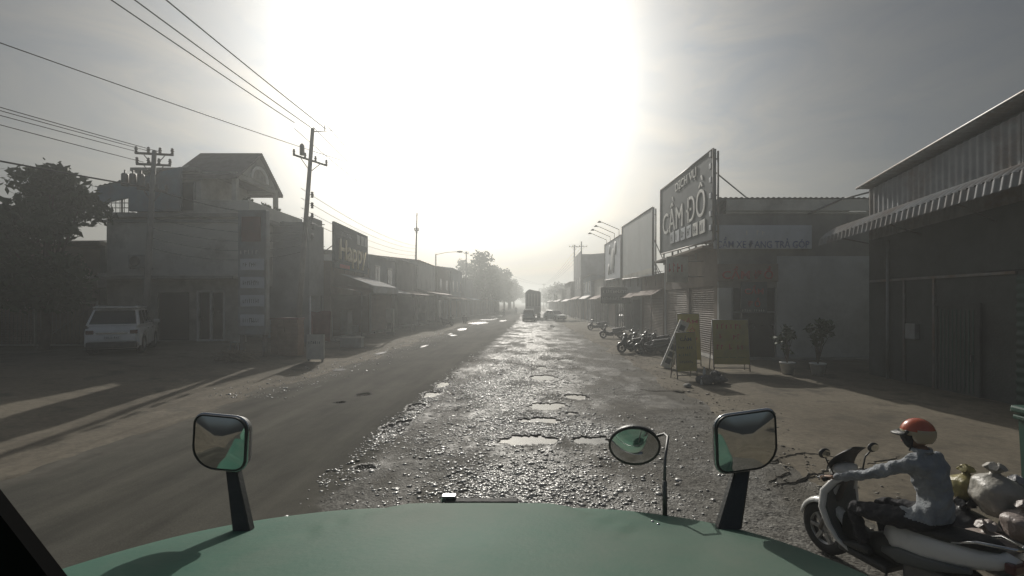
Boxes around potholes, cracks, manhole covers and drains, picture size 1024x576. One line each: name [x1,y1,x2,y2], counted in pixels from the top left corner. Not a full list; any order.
pothole [523,402,569,411]
pothole [568,435,610,446]
pothole [493,433,563,447]
pothole [512,416,564,424]
crack [769,452,833,487]
